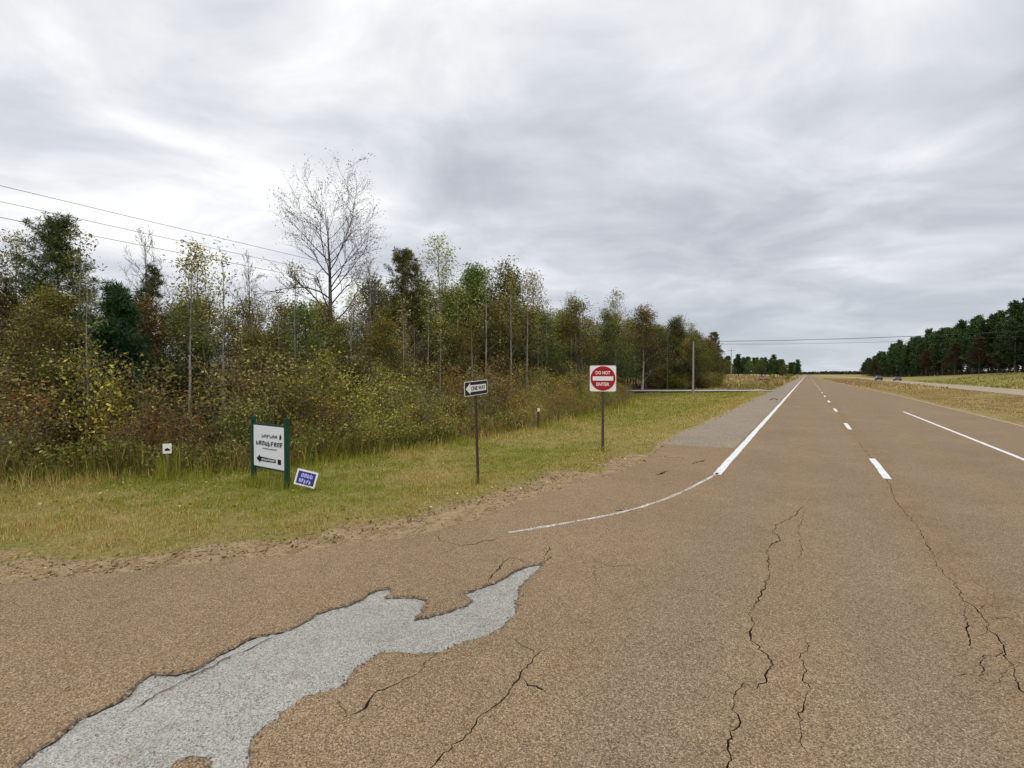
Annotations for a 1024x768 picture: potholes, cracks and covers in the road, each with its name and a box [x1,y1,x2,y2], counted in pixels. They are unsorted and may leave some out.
crack [431,534,524,581]
crack [329,656,434,734]
crack [710,506,805,768]
crack [431,638,549,768]
crack [783,642,811,756]
